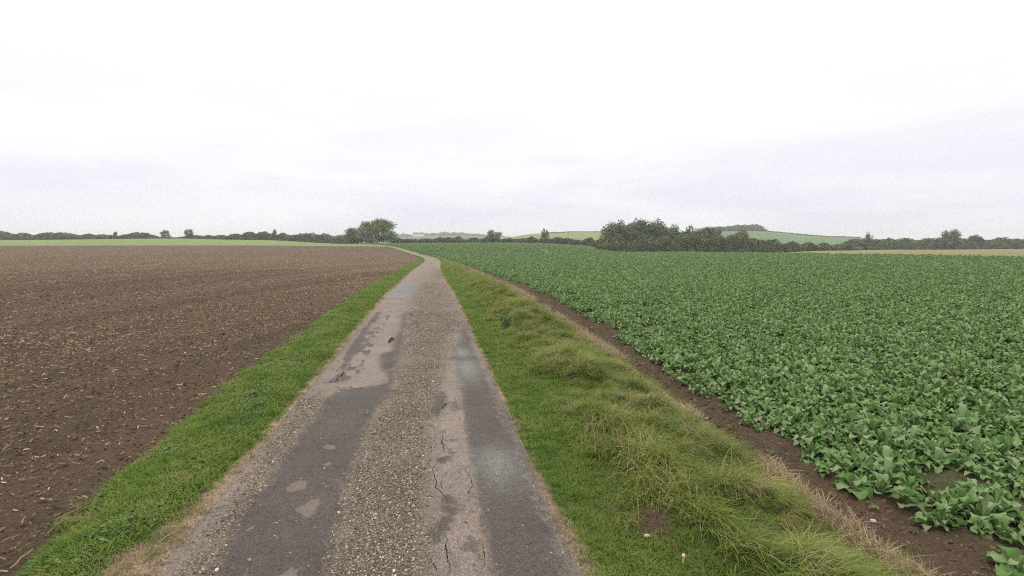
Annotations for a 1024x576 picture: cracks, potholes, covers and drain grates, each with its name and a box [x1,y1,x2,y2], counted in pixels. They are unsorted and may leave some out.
crack [431,463,473,501]
